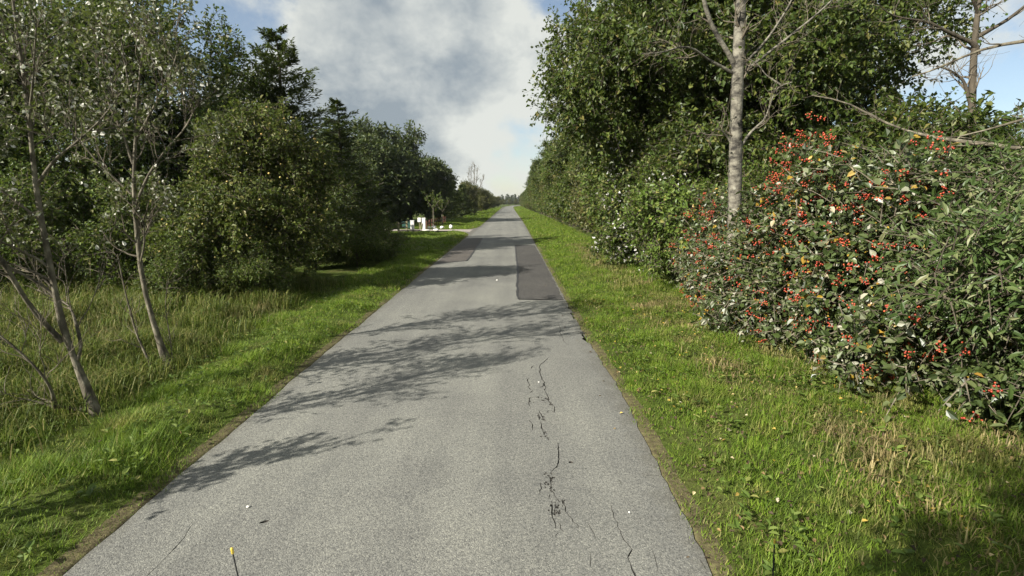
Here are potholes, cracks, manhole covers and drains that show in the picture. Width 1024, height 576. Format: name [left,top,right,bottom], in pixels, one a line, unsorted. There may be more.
crack [527,358,658,576]
